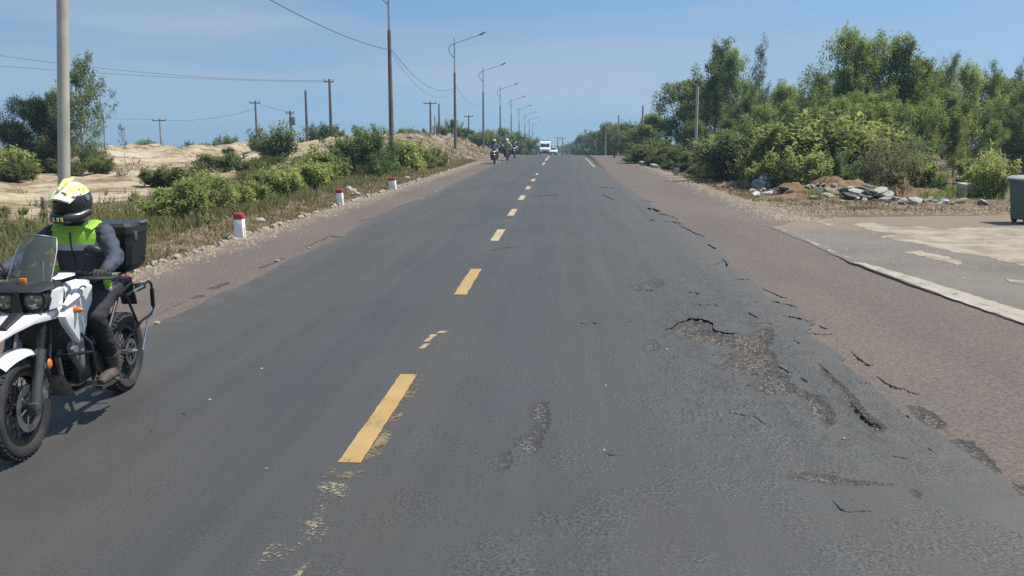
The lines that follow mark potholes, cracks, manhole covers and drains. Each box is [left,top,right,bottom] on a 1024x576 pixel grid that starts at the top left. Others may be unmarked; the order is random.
crack [832,500,872,513]
crack [850,350,920,428]
pothole [948,439,1002,475]
pothole [672,321,800,395]
crack [640,200,832,344]
pothole [497,449,515,472]
pothole [795,389,837,428]
pothole [512,402,552,454]
pothole [906,404,947,430]
crack [777,364,833,383]
